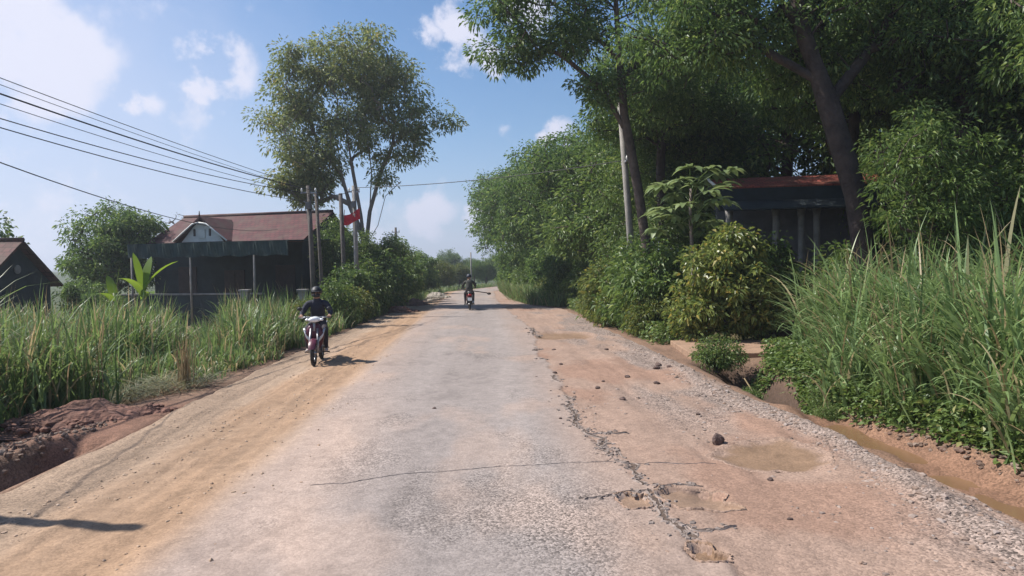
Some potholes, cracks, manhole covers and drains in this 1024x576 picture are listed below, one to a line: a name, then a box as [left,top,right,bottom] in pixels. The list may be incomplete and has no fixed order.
crack [313,327,737,541]
pothole [704,437,836,473]
pothole [684,540,734,563]
pothole [650,484,747,513]
pothole [613,491,654,510]
